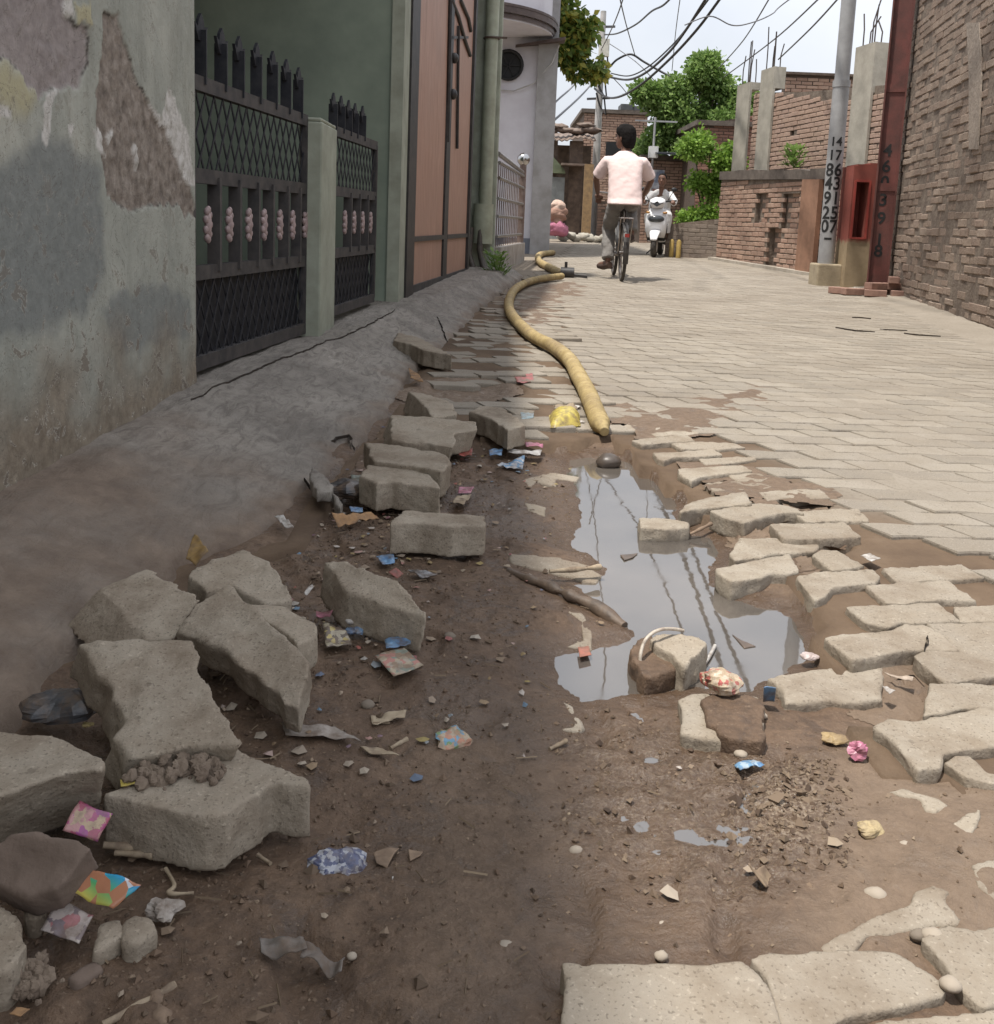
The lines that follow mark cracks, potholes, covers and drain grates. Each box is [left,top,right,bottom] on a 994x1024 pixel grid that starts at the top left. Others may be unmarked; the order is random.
pothole [0,398,994,1024]
crack [191,309,395,401]
crack [835,317,941,337]
